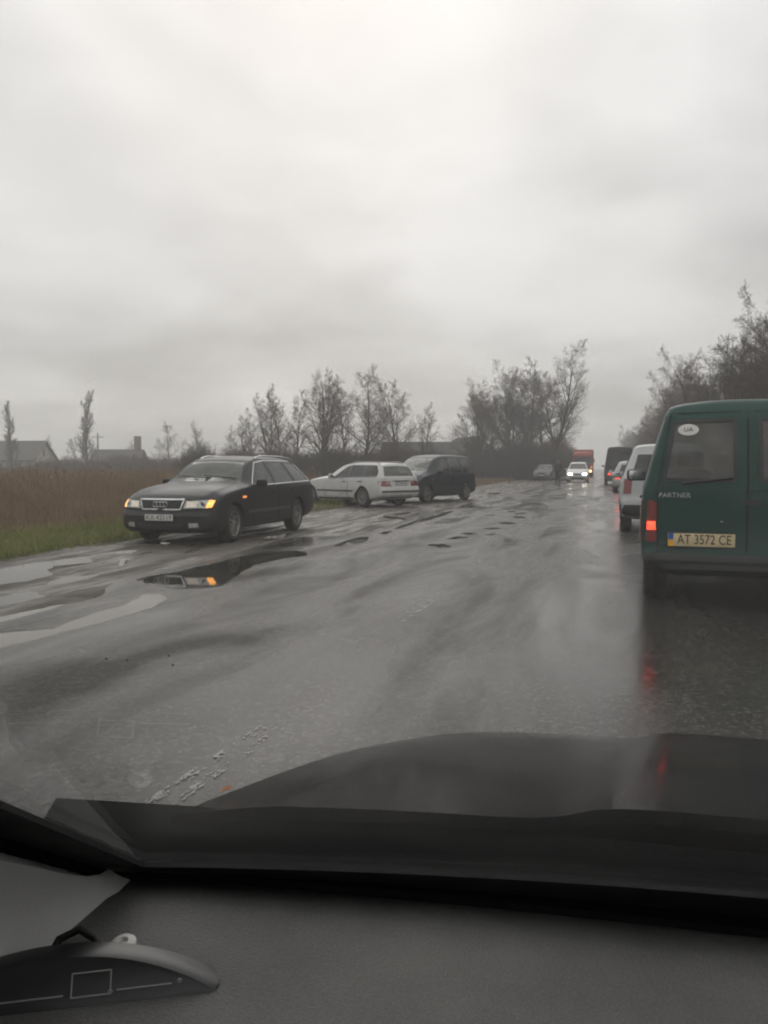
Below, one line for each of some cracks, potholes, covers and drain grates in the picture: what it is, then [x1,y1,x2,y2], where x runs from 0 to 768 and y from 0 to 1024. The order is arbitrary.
pothole [334,537,369,547]
pothole [137,550,308,590]
pothole [394,511,453,529]
